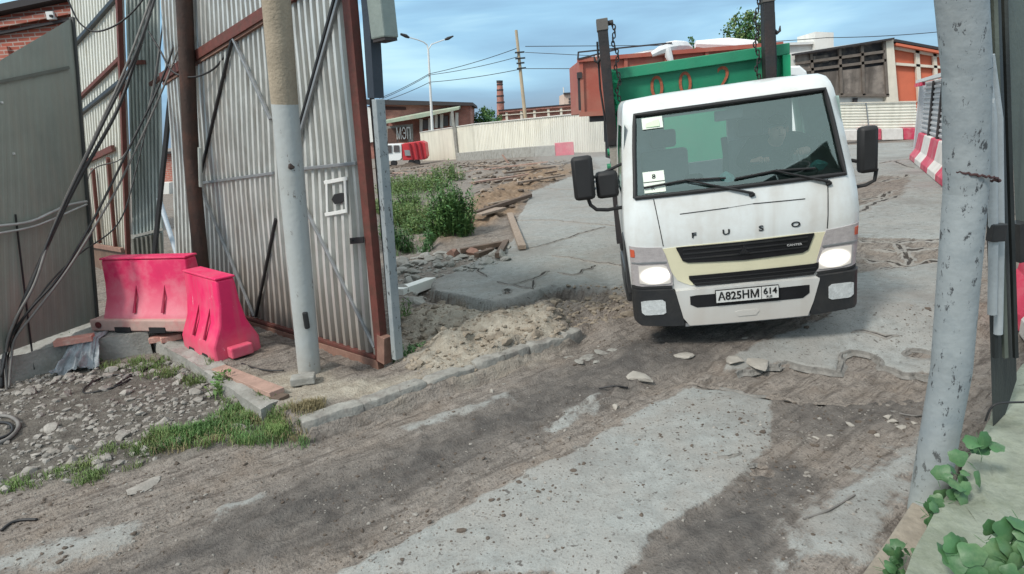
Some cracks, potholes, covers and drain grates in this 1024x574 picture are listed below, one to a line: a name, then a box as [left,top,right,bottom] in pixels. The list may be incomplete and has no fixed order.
crack [470,219,622,289]
pothole [653,349,929,407]
